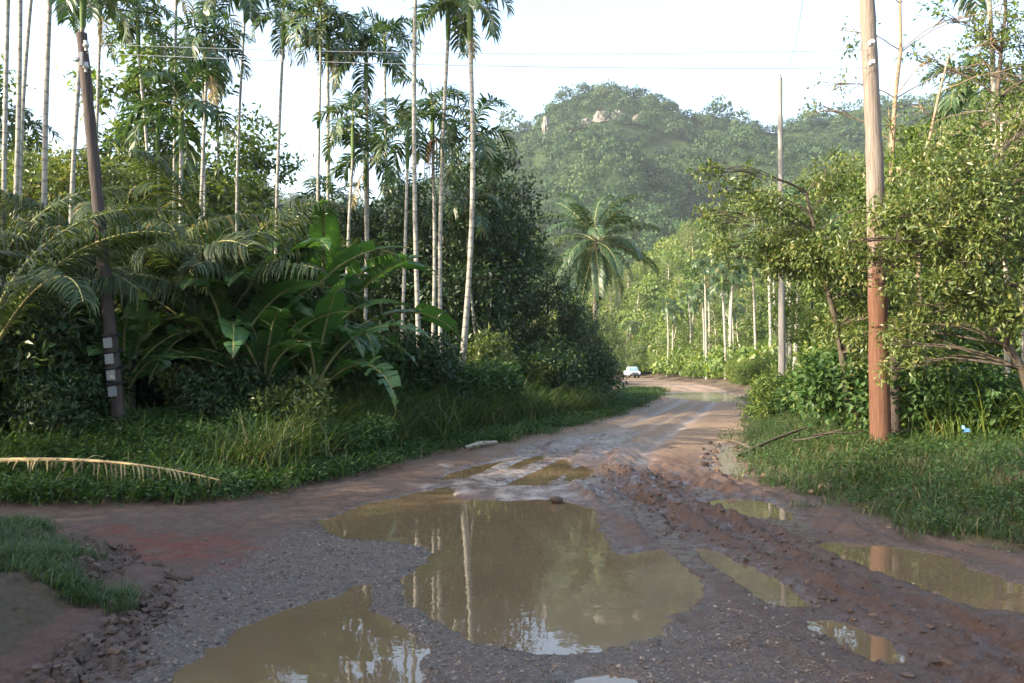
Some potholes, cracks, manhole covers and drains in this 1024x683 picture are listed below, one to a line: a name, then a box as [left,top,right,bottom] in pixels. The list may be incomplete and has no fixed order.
pothole [151,579,440,683]
pothole [557,461,601,482]
pothole [496,452,549,469]
pothole [308,484,716,659]
pothole [431,458,511,480]
pothole [496,457,586,486]
